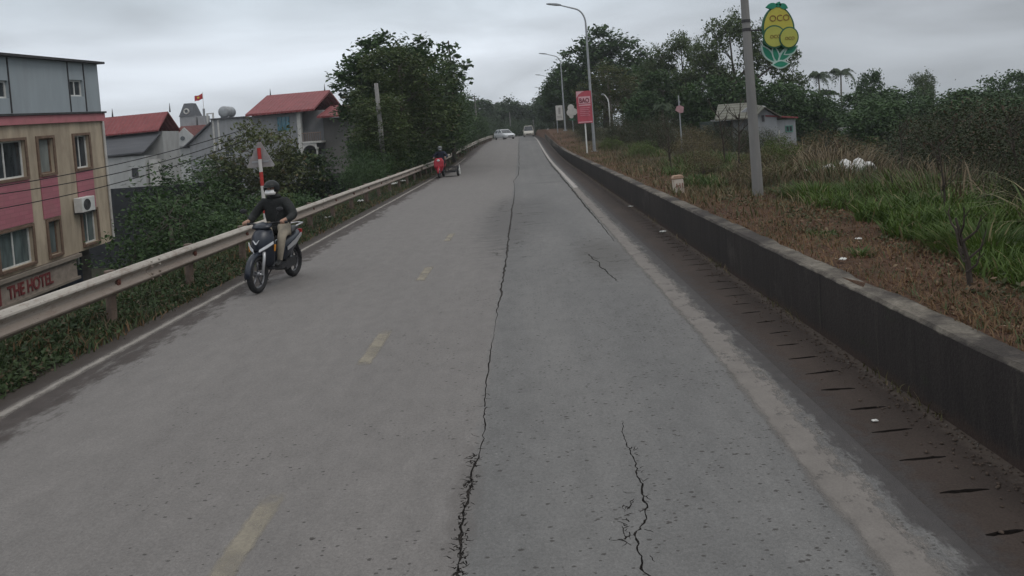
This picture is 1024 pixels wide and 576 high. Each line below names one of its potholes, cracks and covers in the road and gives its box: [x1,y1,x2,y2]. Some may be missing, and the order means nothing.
crack [609,423,655,576]
crack [444,143,556,576]
crack [541,149,629,281]
